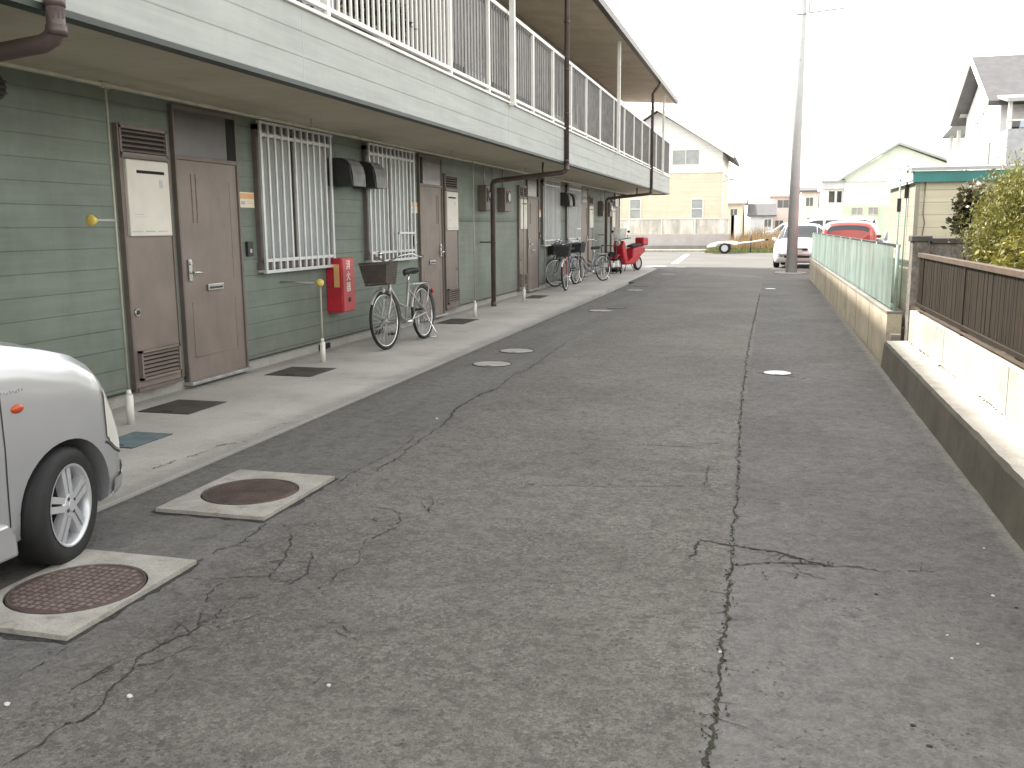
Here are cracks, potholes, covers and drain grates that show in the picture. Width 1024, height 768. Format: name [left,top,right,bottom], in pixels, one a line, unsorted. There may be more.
crack [520,296,941,768]
manhole cover [0,549,199,644]
manhole cover [151,469,339,523]
crack [3,501,435,766]
